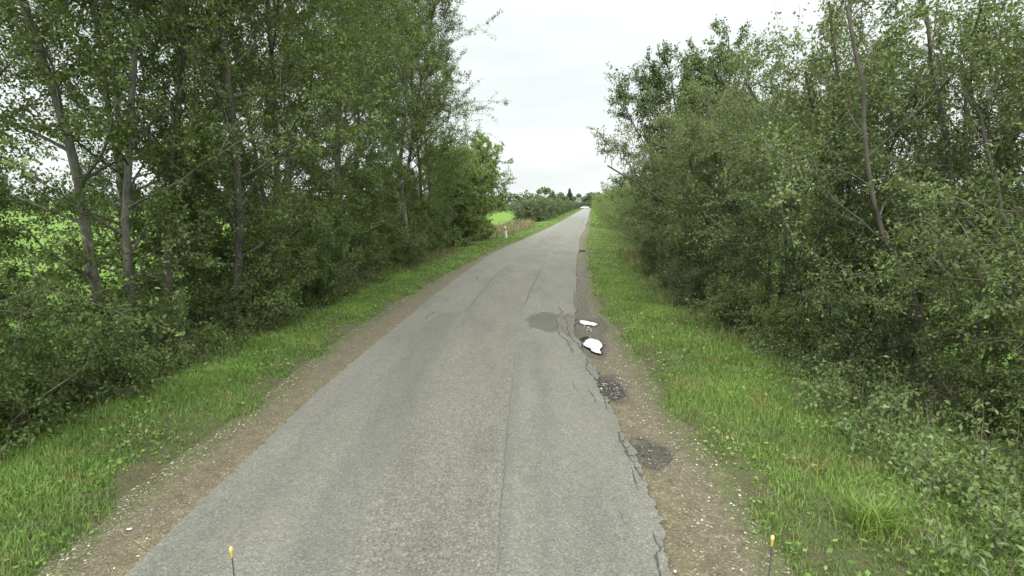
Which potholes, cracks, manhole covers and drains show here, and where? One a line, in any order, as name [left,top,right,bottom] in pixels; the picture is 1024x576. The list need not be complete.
crack [616,431,643,490]
pothole [579,337,604,356]
pothole [597,377,626,401]
pothole [576,319,600,330]
pothole [629,439,673,471]
crack [556,287,608,410]
crack [653,517,662,576]
